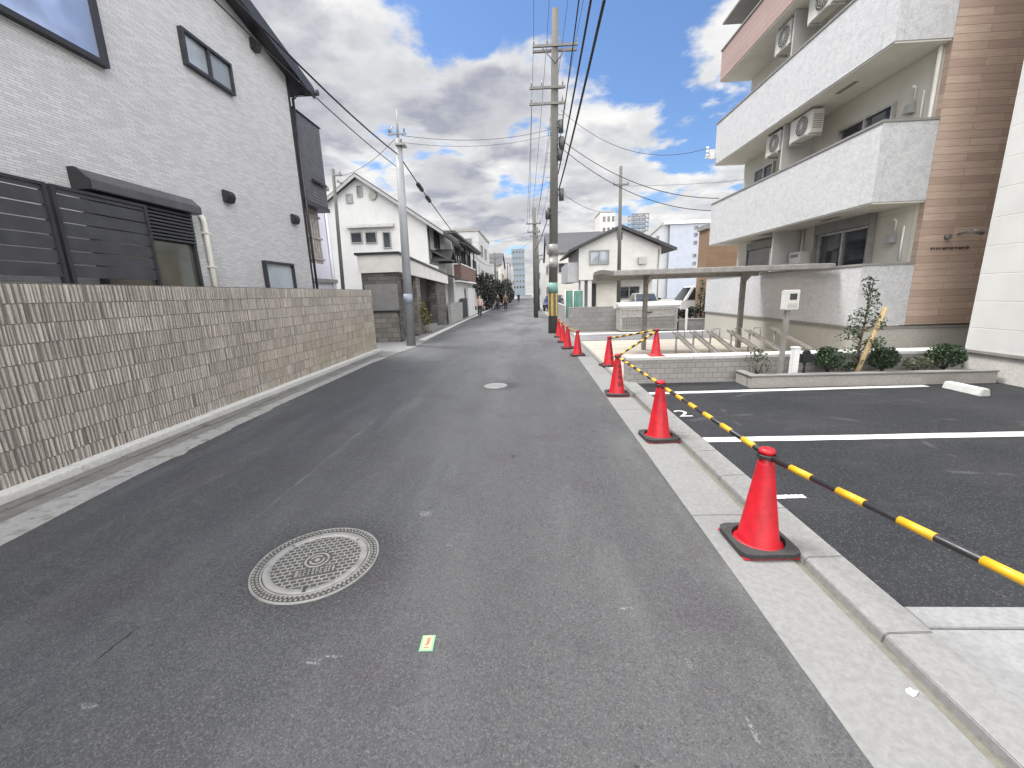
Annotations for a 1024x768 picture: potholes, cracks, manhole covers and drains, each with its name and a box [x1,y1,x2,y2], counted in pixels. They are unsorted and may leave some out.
manhole cover [248,528,379,605]
